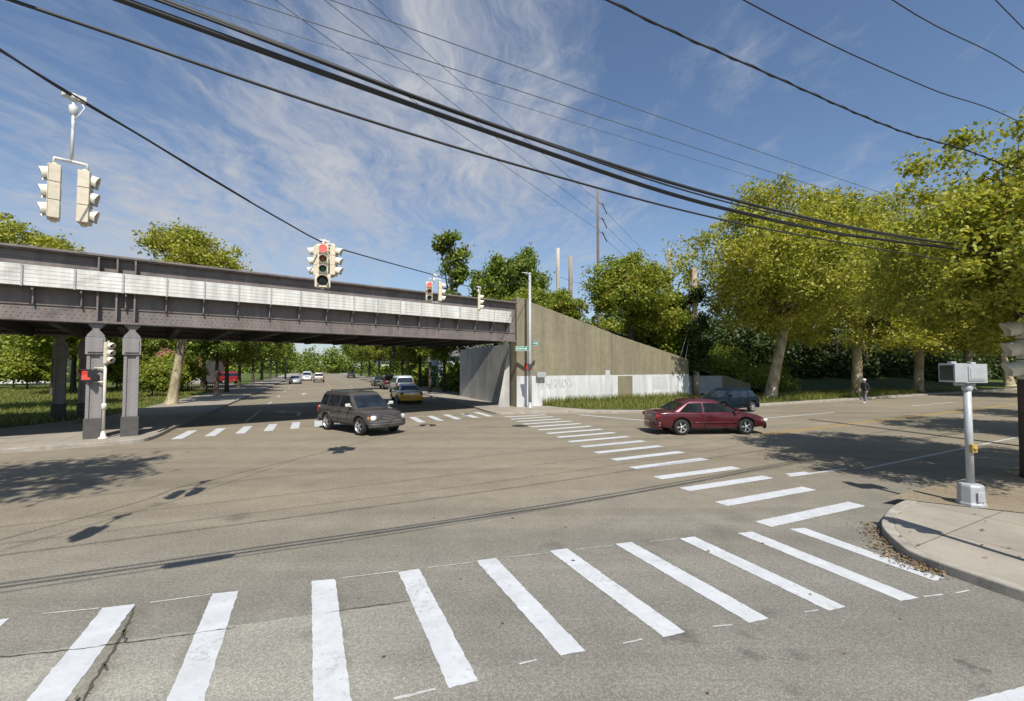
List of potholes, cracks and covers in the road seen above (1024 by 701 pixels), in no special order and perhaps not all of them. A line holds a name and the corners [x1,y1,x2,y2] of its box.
crack [82,608,134,701]
